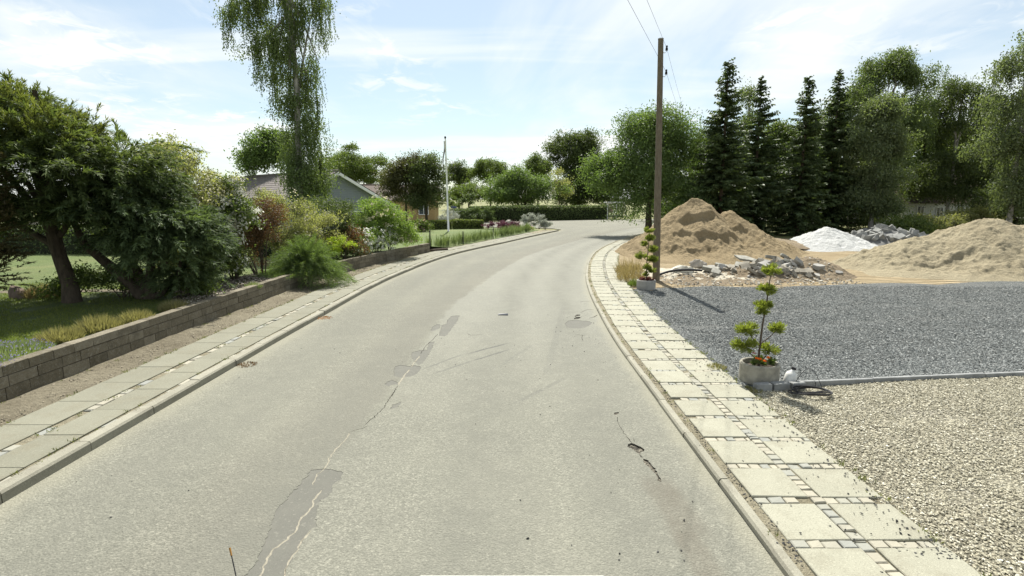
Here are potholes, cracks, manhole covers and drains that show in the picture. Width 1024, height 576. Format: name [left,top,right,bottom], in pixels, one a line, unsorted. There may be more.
crack [259,335,437,576]
